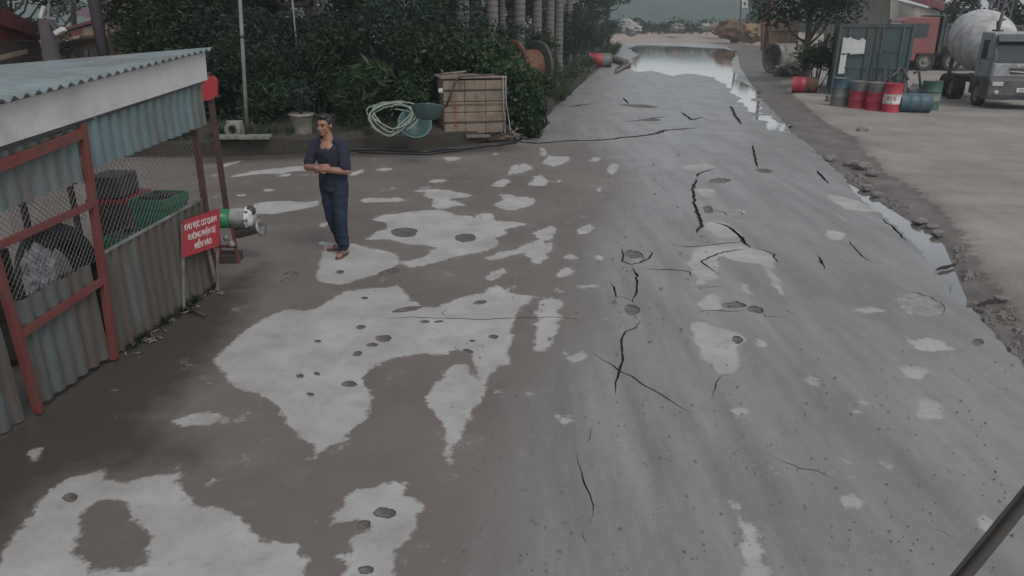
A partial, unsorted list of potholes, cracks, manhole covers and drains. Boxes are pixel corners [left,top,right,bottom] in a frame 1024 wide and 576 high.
pothole [391,228,418,237]
crack [610,169,778,302]
crack [730,106,742,125]
crack [576,426,594,540]
crack [515,98,702,144]
pothole [624,249,643,259]
crack [598,322,685,410]
pothole [373,507,396,519]
